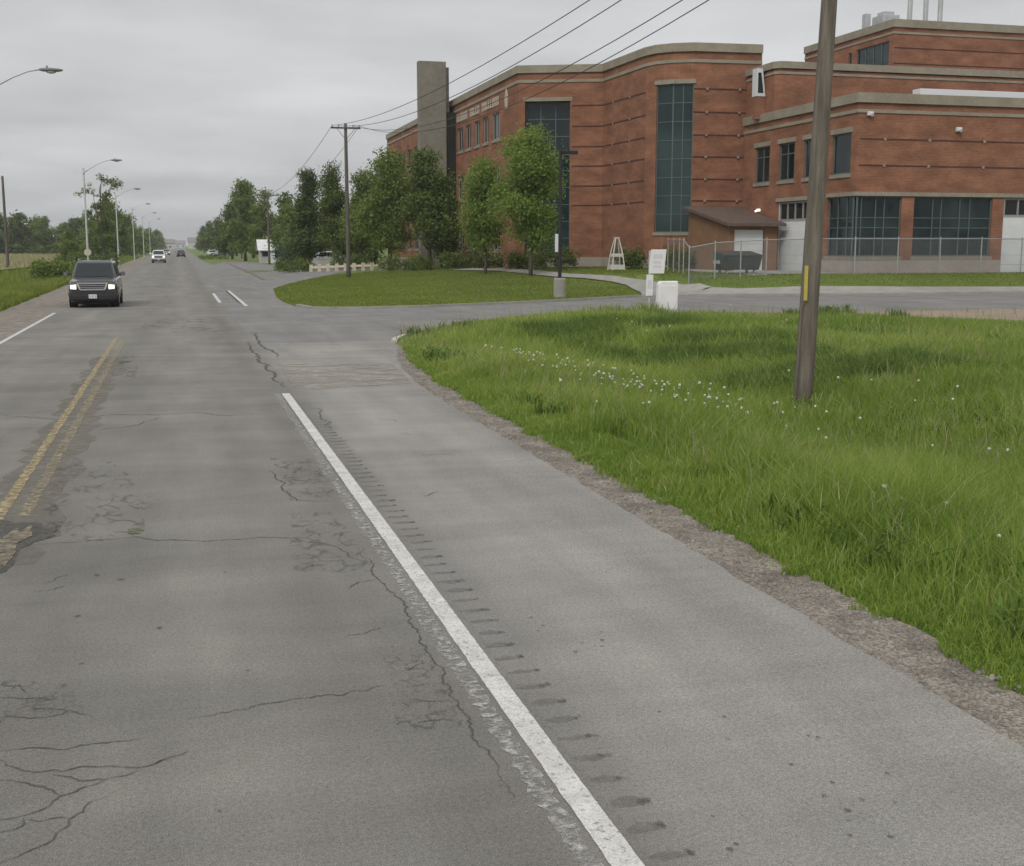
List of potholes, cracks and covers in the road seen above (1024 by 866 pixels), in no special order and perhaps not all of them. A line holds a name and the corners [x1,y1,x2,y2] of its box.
crack [187,685,381,719]
crack [0,738,188,863]
crack [47,504,356,559]
crack [0,684,93,718]
